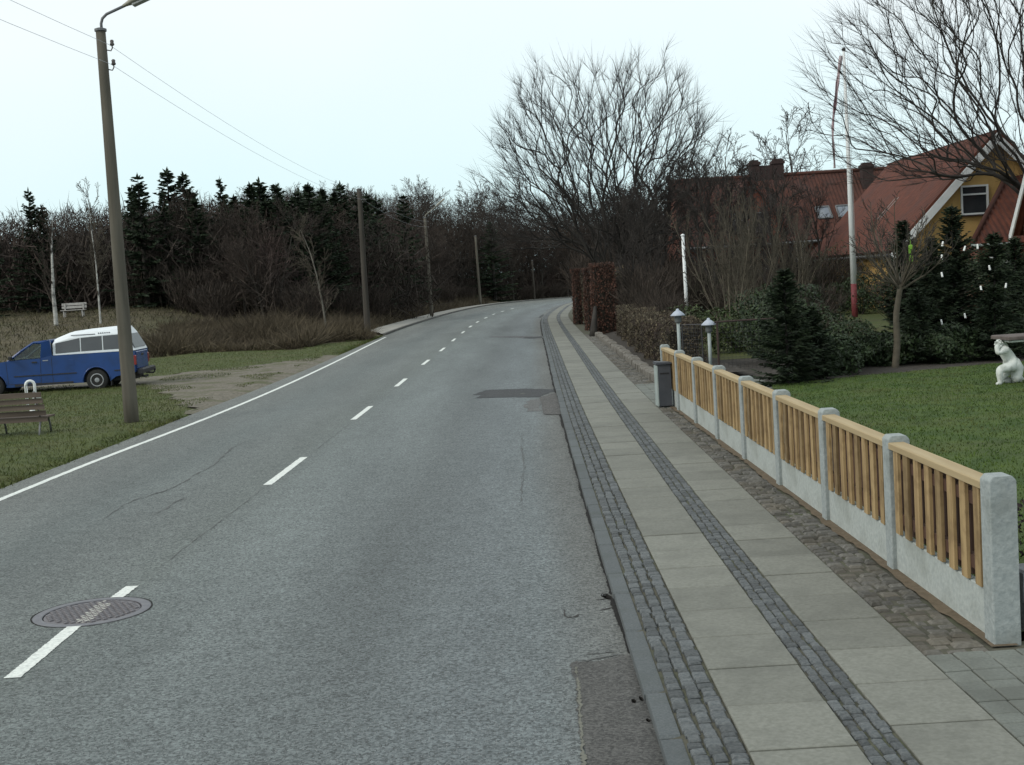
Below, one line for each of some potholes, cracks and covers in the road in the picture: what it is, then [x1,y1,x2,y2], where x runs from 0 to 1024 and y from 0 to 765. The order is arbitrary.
manhole cover [30,596,153,628]
crack [559,415,630,661]
crack [101,443,242,525]
